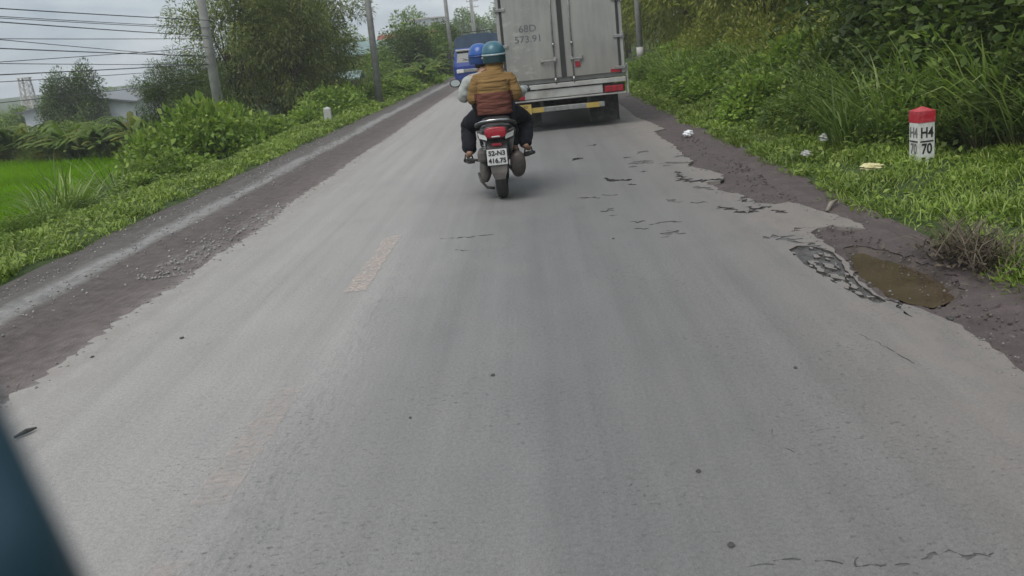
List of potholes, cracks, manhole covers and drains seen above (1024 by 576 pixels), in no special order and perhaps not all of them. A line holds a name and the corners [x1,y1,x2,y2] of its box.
crack [750,550,989,567]
pothole [843,245,965,311]
crack [624,151,909,315]
